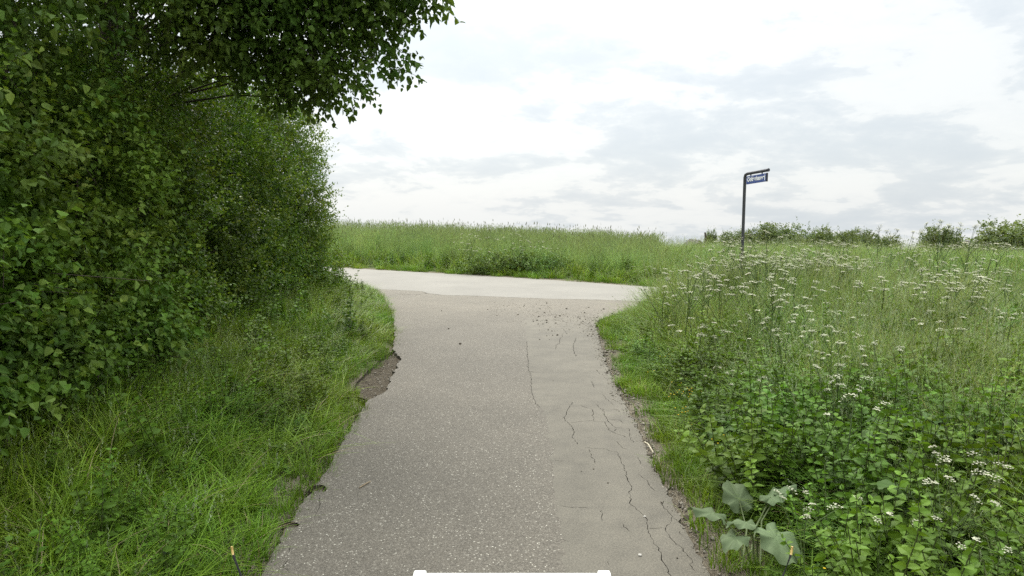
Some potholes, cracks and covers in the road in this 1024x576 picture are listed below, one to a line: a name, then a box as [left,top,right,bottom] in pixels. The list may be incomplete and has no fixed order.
crack [563,383,694,576]
pothole [355,350,400,402]
